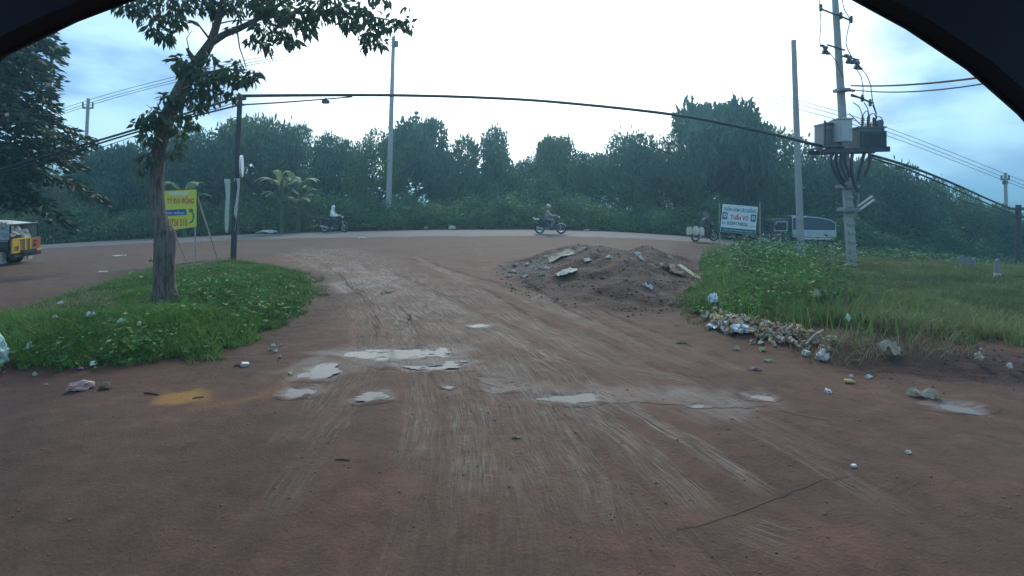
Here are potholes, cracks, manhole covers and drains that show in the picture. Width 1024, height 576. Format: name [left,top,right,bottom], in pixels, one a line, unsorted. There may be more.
pothole [345,387,399,407]
pothole [738,391,783,403]
pothole [911,399,1003,417]
pothole [312,340,485,369]
pothole [280,360,358,383]
crack [676,475,849,530]
pothole [525,389,621,408]
pothole [365,356,497,373]
